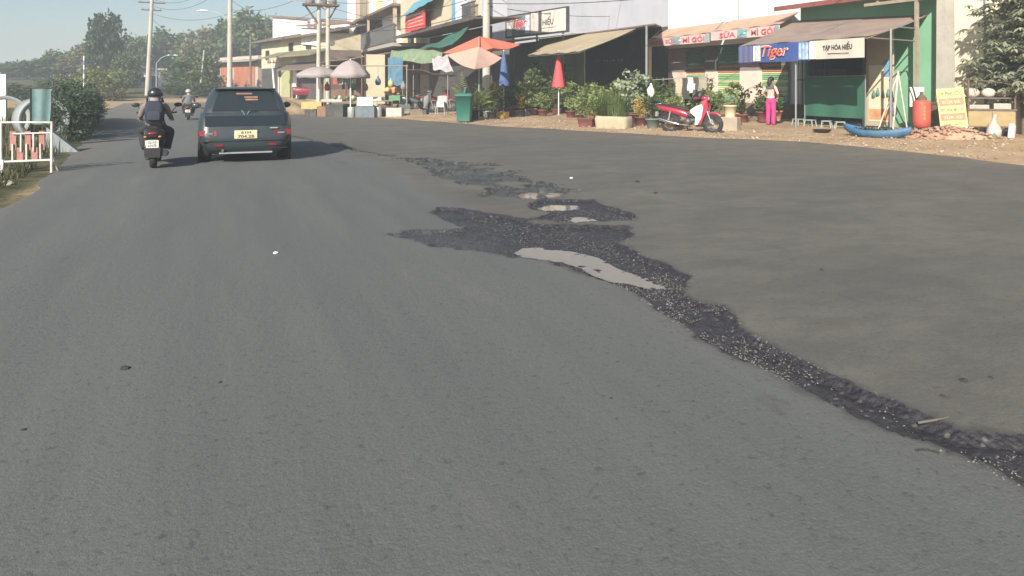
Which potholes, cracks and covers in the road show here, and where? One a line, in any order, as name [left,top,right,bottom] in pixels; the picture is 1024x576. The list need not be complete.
pothole [528,199,638,223]
pothole [388,207,1024,487]
pothole [391,157,582,200]
